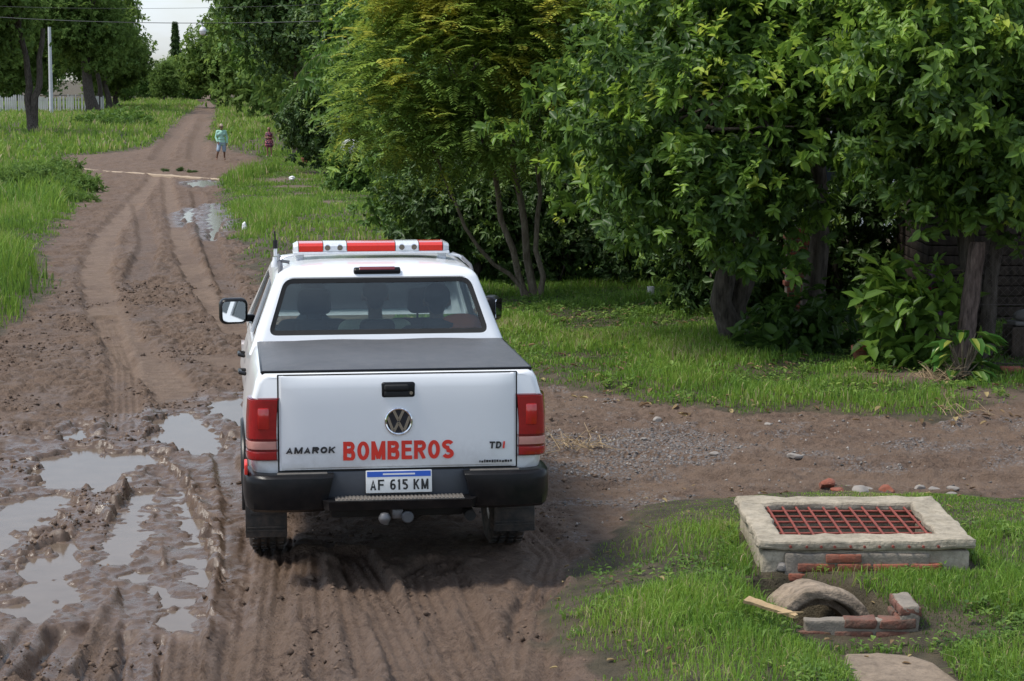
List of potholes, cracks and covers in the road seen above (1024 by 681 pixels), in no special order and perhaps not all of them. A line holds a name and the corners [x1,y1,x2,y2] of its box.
pothole [0,445,169,502]
drain grate [734,495,976,581]
pothole [145,411,230,455]
